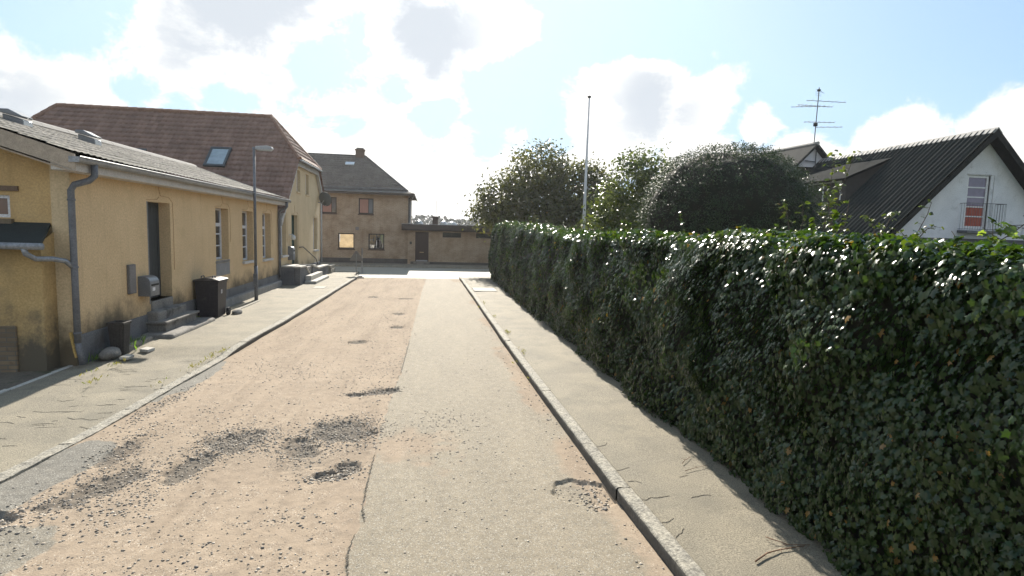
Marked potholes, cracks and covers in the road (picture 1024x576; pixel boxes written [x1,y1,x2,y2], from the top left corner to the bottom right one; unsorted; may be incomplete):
pothole [0,511,23,525]
pothole [550,477,616,510]
pothole [275,417,383,465]
pothole [13,433,174,525]
pothole [151,427,270,490]
pothole [343,388,402,397]
pothole [310,460,365,483]
